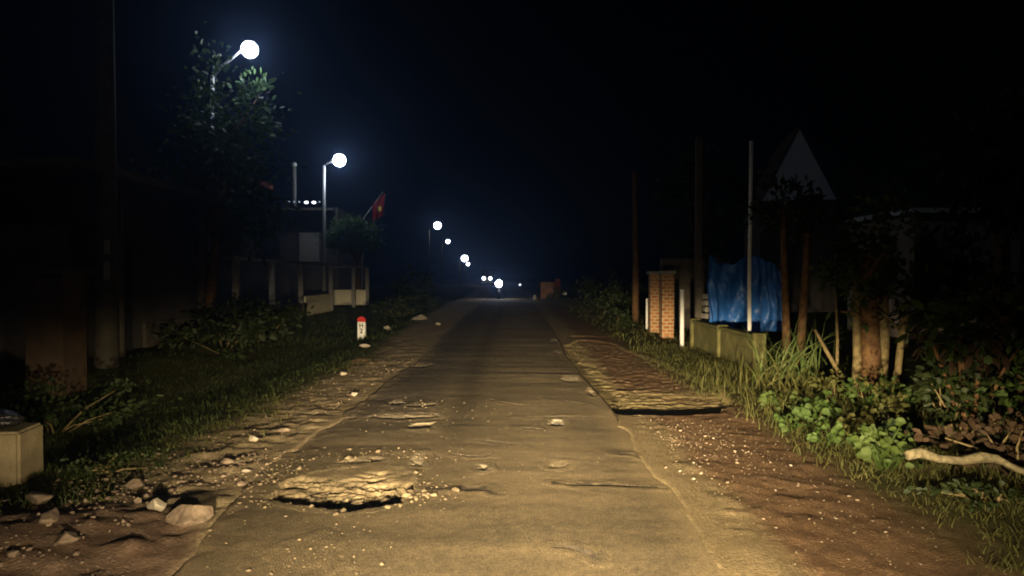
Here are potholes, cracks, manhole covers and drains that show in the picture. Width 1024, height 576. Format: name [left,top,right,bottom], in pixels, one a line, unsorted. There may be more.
pothole [254,461,426,516]
crack [422,482,510,499]
pothole [398,421,444,431]
pothole [381,398,413,408]
pothole [537,457,579,472]
crack [537,540,614,568]
pothole [540,417,573,429]
crack [604,451,643,462]
pothole [400,400,444,409]
crack [541,479,673,493]
